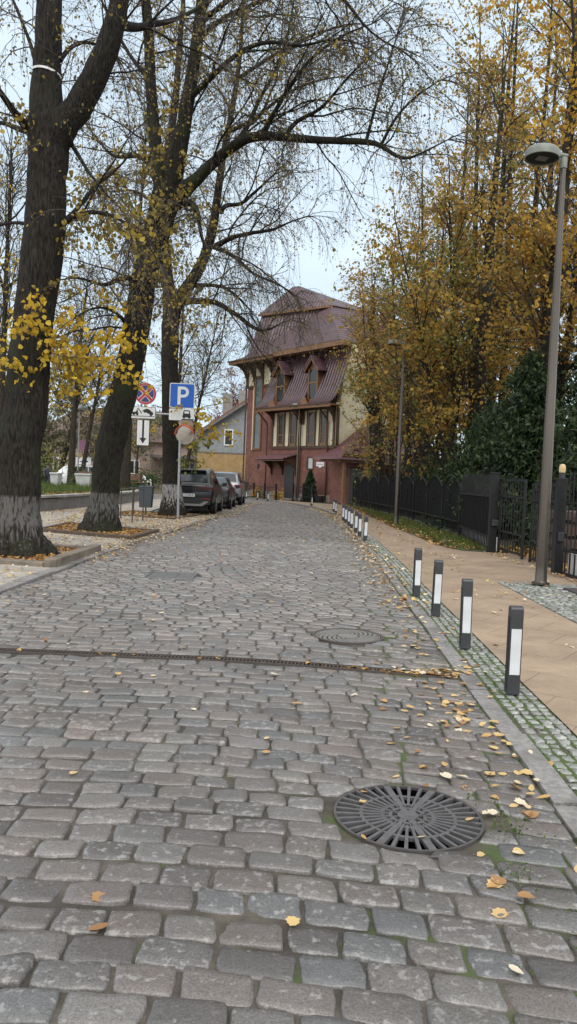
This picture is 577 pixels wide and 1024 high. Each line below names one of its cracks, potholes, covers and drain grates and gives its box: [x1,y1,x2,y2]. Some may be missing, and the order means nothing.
manhole cover [312,628,384,645]
manhole cover [144,571,198,580]
